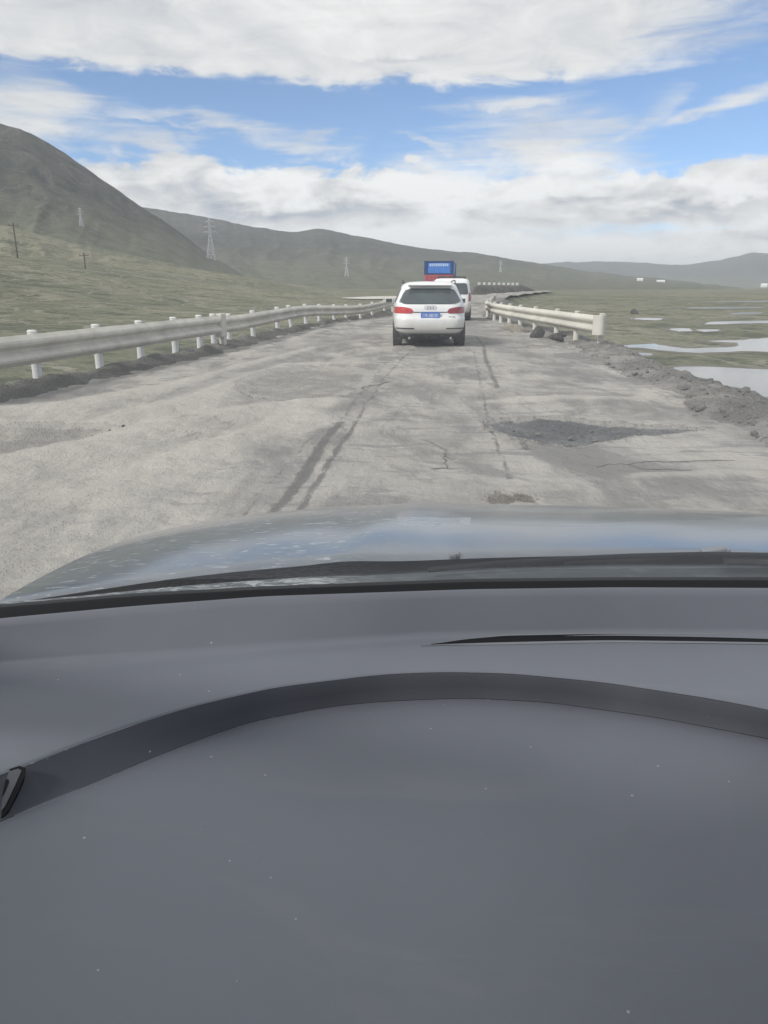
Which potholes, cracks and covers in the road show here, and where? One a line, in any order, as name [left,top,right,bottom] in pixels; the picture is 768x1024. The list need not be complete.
pothole [481,488,539,505]
crack [421,438,458,469]
crack [597,460,735,470]
